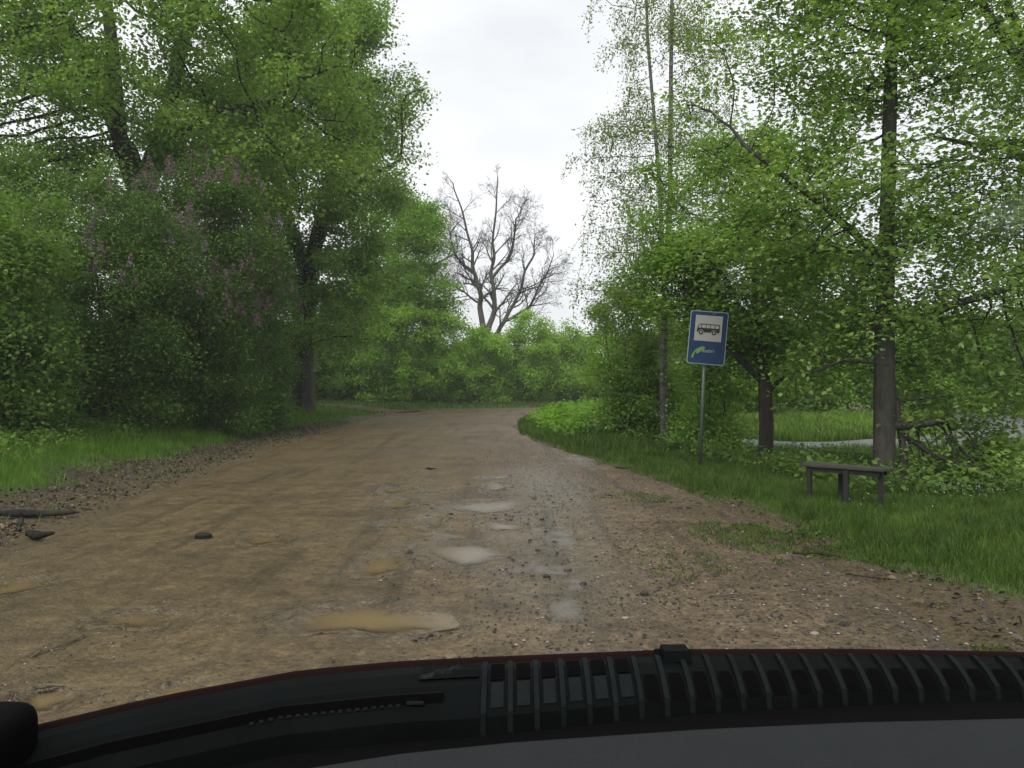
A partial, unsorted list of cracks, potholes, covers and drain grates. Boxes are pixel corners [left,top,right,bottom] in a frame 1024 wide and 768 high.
pothole [476,520,531,531]
pothole [12,685,83,716]
pothole [341,552,415,580]
pothole [406,541,516,570]
pothole [429,498,539,515]
pothole [78,605,180,632]
pothole [368,498,420,510]
pothole [482,481,512,493]
pothole [234,532,295,546]
pothole [264,599,463,638]
pothole [0,573,56,597]
